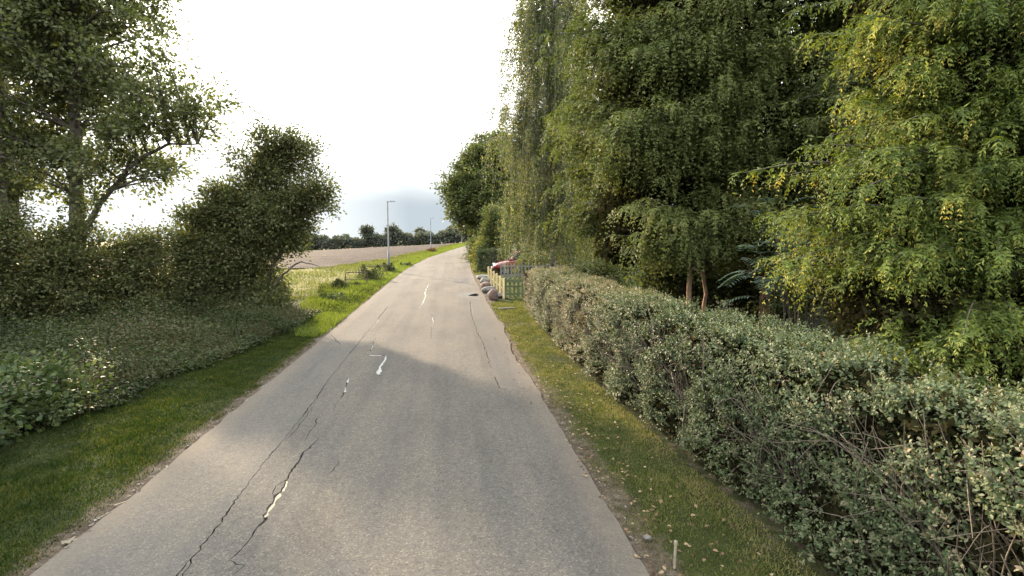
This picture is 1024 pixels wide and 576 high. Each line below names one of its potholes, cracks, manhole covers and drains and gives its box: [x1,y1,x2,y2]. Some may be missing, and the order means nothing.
crack [365,342,386,376]
crack [229,377,350,575]
